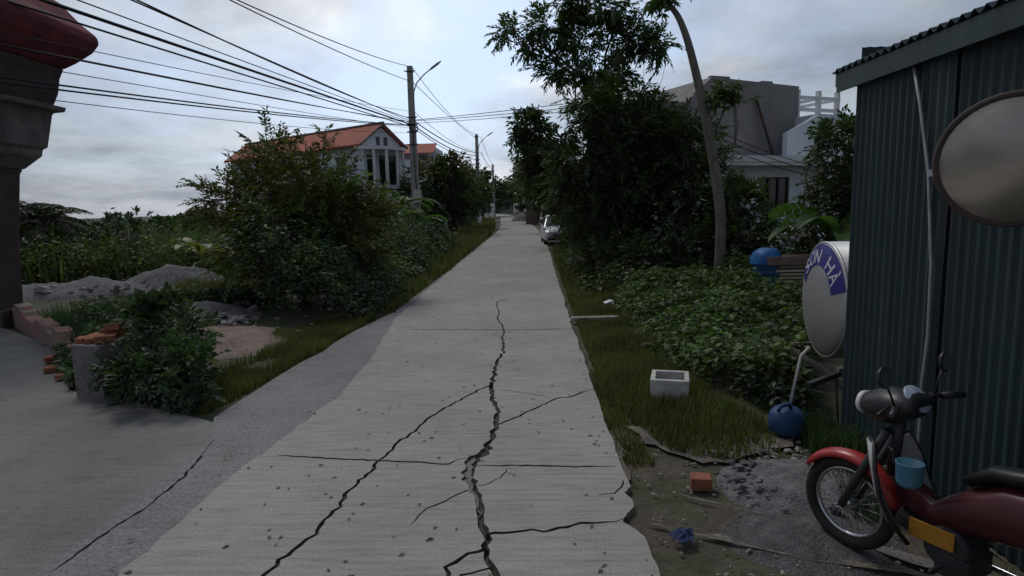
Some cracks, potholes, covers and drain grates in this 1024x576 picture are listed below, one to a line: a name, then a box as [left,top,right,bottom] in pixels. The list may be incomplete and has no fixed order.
crack [51,440,214,572]
crack [260,299,627,576]
